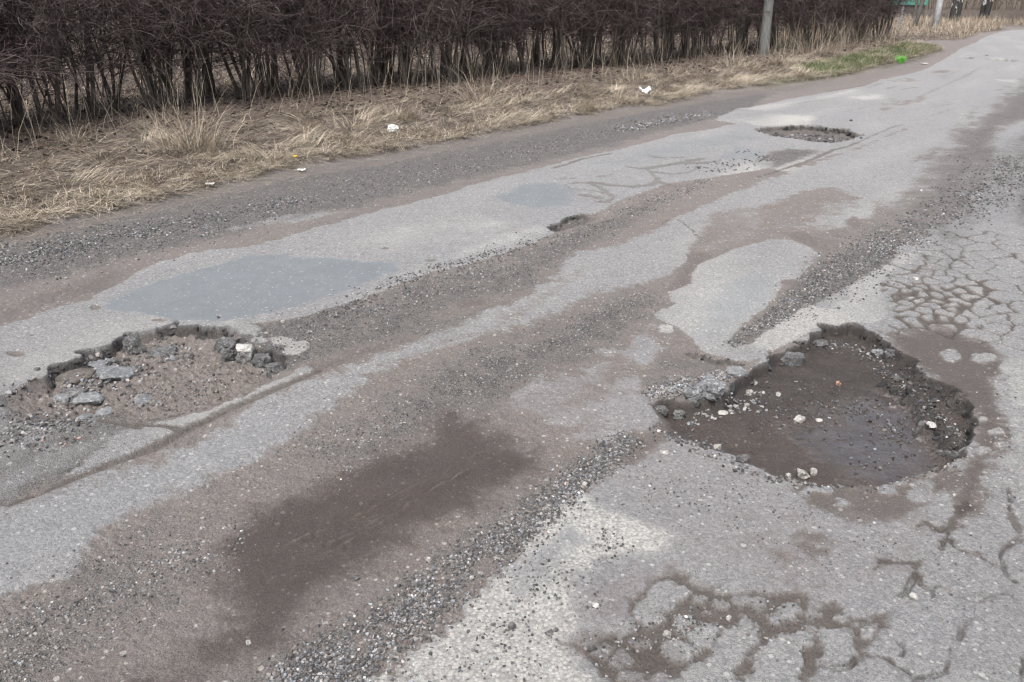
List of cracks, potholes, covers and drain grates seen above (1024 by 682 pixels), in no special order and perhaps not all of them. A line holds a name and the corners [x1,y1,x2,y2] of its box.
pothole [754,125,864,143]
crack [879,230,1024,351]
crack [585,486,1024,682]
pothole [547,213,599,232]
pothole [0,320,290,425]
crack [550,153,720,236]
pothole [635,322,977,487]
